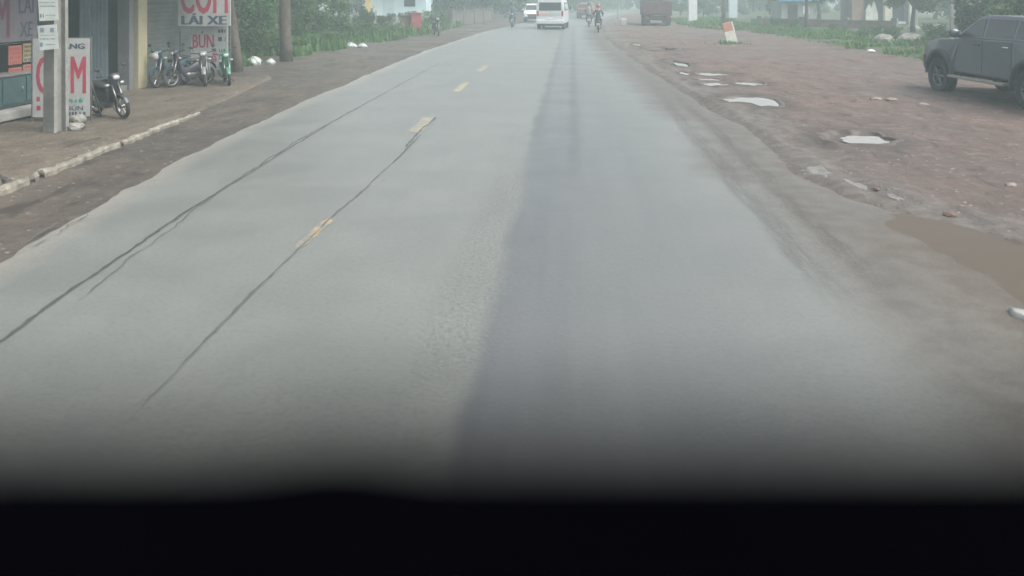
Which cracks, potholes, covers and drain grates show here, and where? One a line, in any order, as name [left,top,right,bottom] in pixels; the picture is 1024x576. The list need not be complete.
pothole [664,59,693,68]
pothole [717,95,785,107]
crack [0,66,436,415]
pothole [813,129,905,146]
